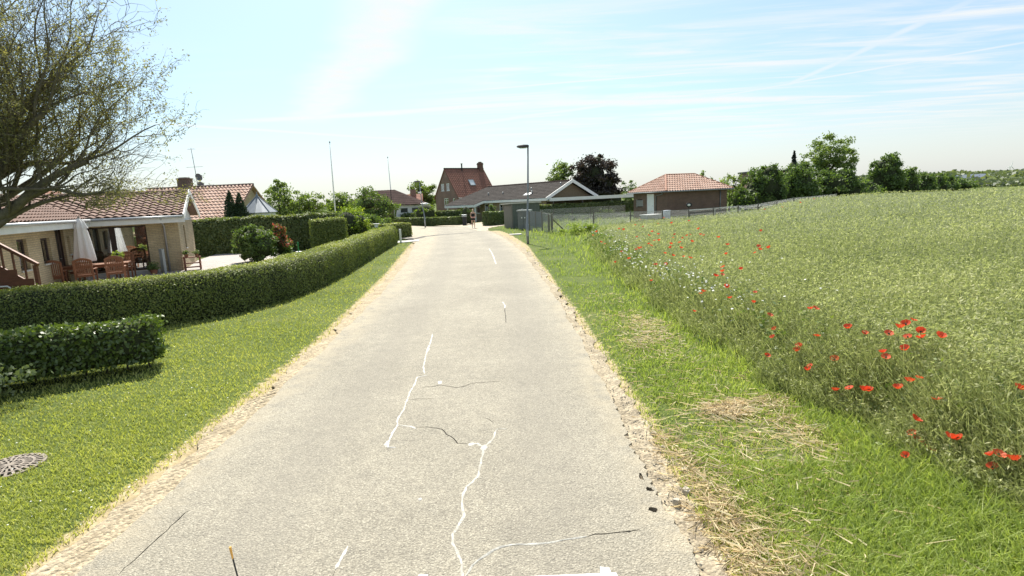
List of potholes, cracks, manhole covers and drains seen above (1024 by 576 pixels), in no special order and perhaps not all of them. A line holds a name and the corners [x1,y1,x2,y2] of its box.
crack [120,510,190,573]
manhole cover [0,453,48,478]
